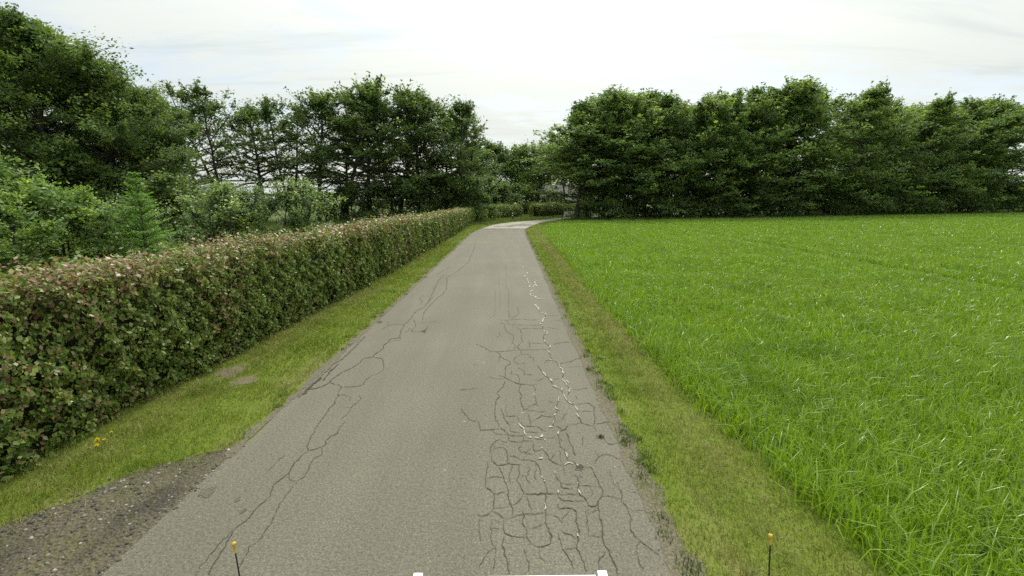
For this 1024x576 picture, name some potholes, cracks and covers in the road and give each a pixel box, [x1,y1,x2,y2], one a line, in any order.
crack [196,244,476,575]
crack [461,266,658,574]
